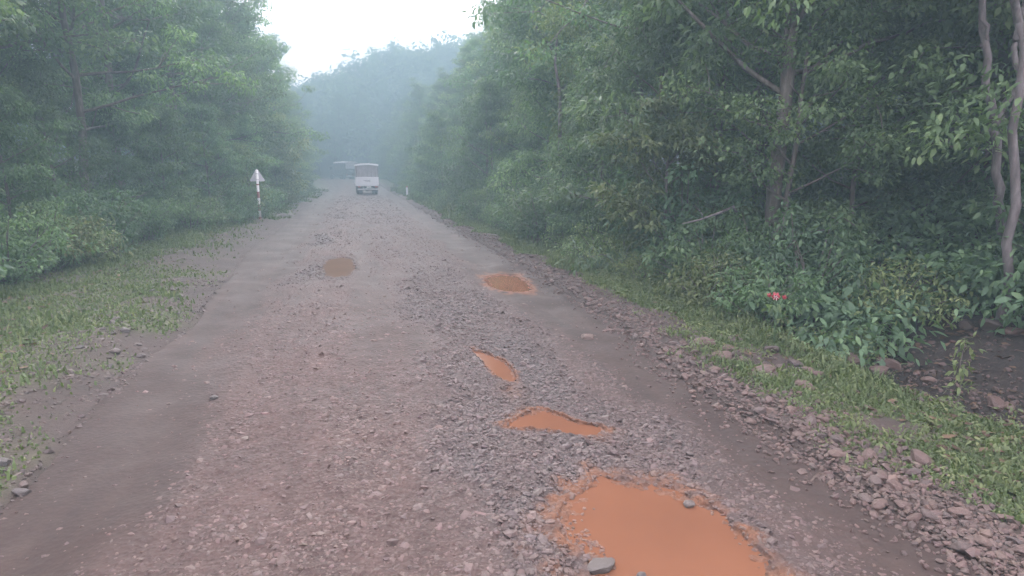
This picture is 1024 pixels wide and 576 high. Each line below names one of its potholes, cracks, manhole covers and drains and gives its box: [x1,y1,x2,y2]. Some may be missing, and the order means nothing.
pothole [317,256,359,280]
pothole [480,273,538,295]
pothole [494,406,613,439]
pothole [539,467,797,576]
pothole [468,347,520,385]
